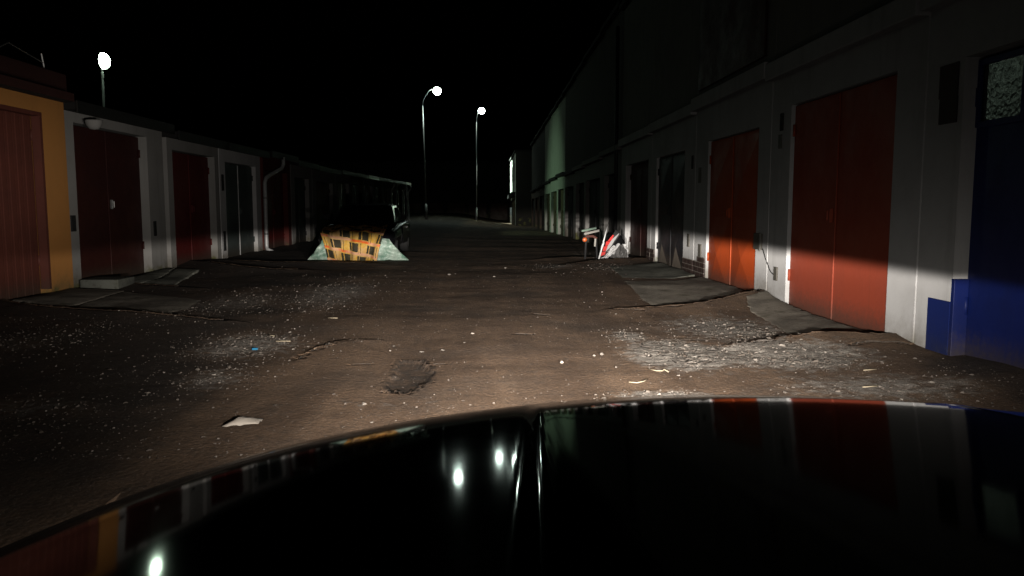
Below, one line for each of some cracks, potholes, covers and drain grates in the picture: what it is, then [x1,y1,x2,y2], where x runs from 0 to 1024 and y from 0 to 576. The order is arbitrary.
crack [634,331,910,368]
crack [613,289,757,310]
crack [295,339,362,359]
pothole [381,359,441,396]
